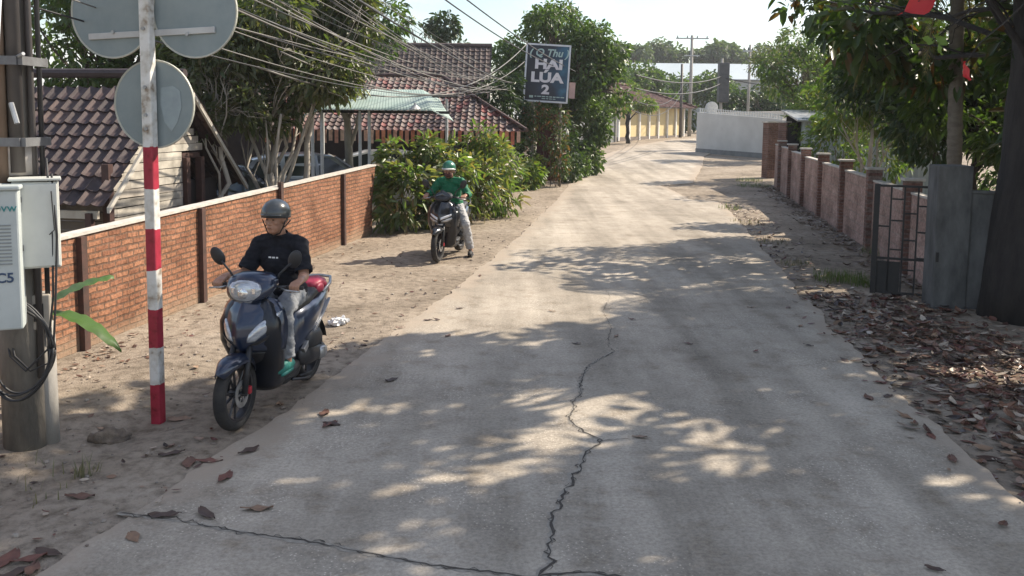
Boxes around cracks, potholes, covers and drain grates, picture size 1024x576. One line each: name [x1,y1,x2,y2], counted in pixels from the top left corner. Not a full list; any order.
crack [117,293,627,576]
